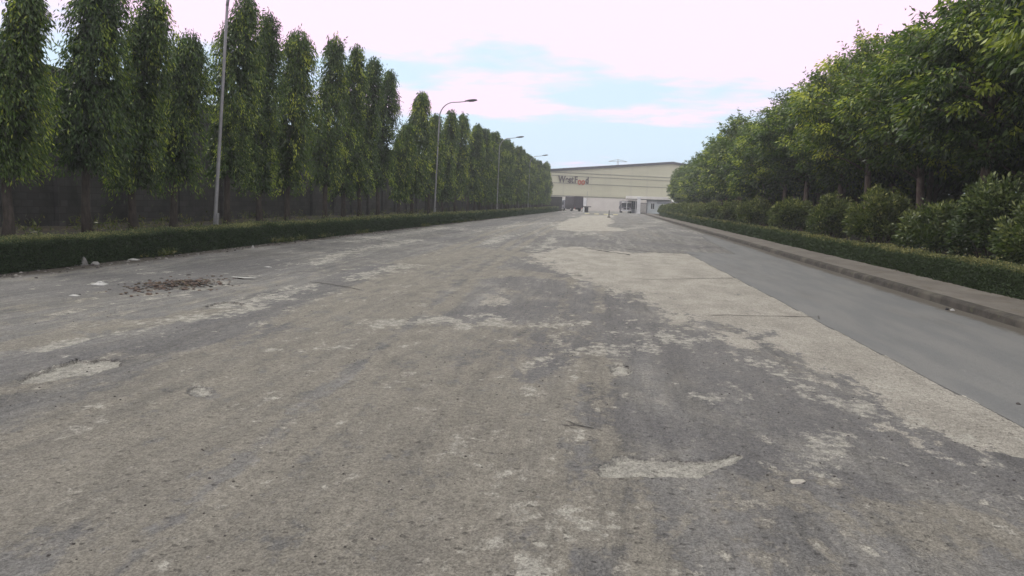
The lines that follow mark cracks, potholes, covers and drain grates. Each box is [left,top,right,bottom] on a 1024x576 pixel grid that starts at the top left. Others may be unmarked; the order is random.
pothole [0,355,137,388]
